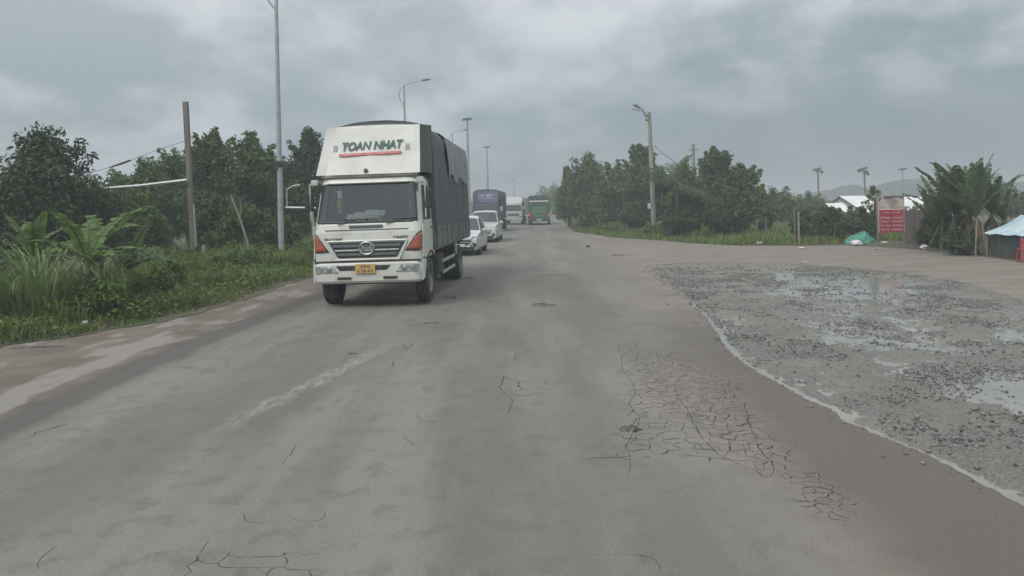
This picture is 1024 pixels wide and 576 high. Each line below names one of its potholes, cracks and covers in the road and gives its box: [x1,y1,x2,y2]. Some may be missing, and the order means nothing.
crack [497,377,556,416]
crack [184,541,320,576]
crack [584,344,857,526]
